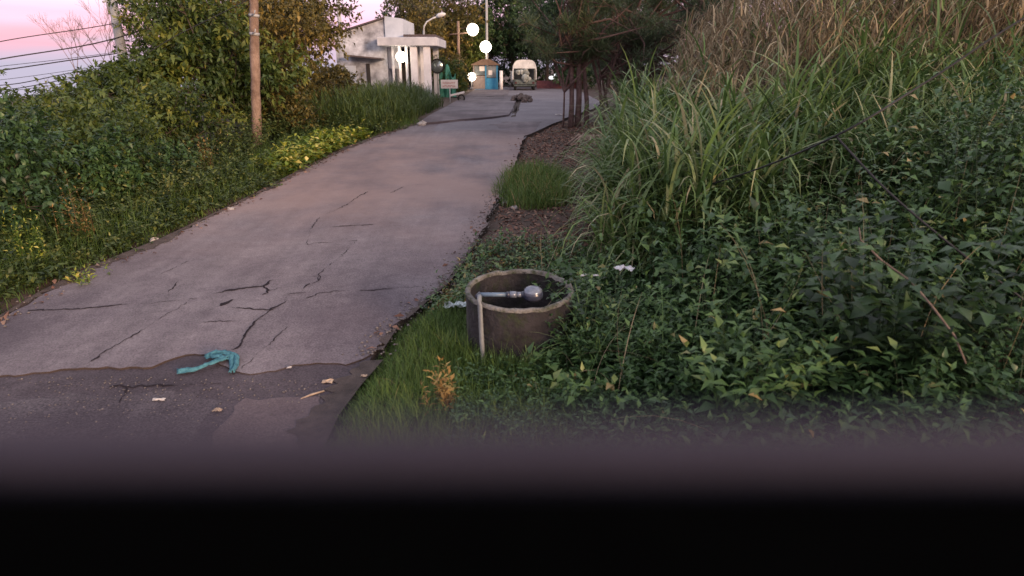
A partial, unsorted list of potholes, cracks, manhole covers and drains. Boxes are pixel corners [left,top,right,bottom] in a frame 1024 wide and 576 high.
crack [109,383,214,403]
crack [29,192,417,367]
